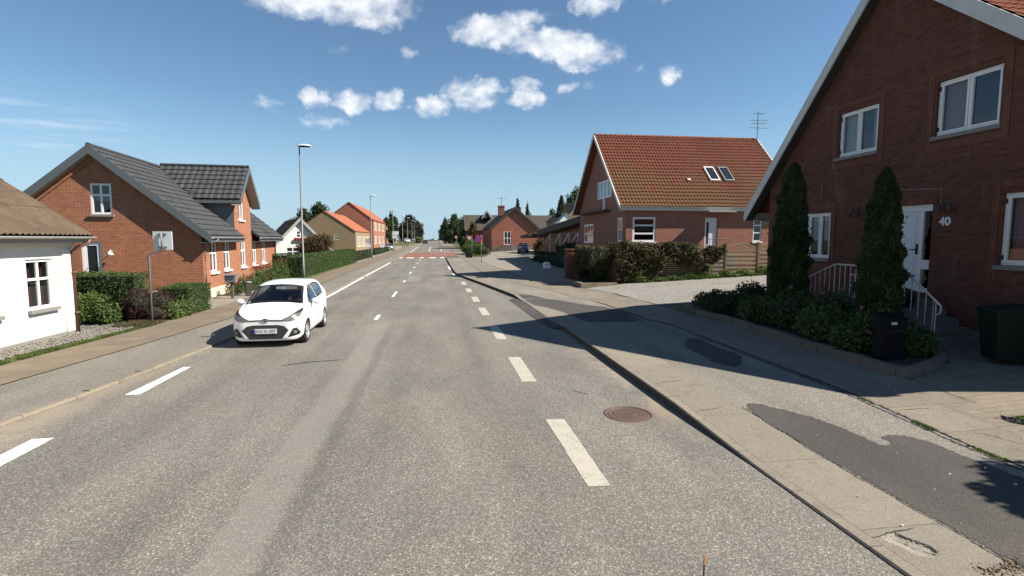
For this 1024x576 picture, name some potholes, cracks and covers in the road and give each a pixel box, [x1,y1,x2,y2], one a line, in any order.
manhole cover [603,406,654,423]
pothole [881,532,940,558]
